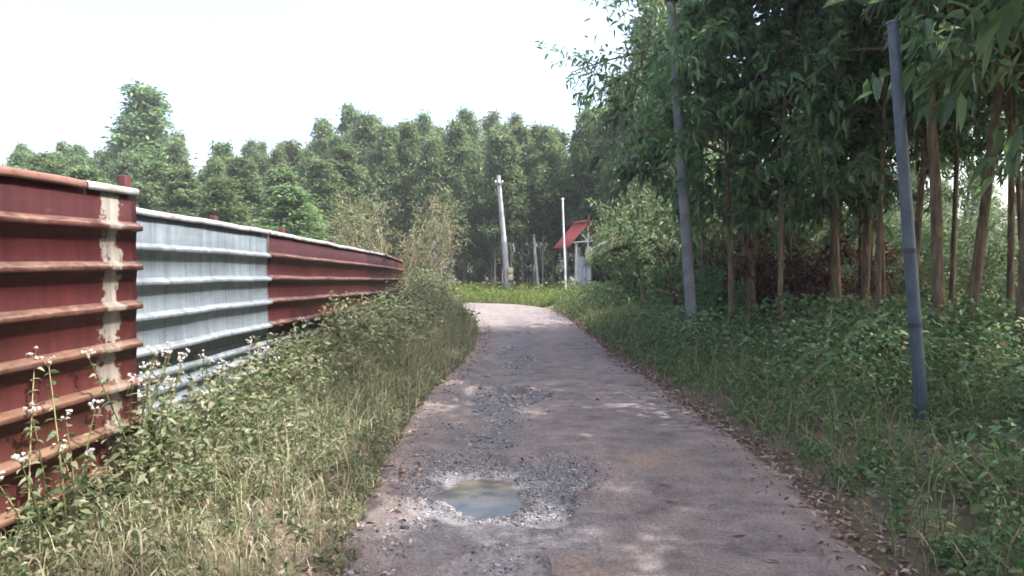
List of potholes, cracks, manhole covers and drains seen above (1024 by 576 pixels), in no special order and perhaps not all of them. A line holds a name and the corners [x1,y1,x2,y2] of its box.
pothole [379,447,613,530]
pothole [452,384,558,408]
